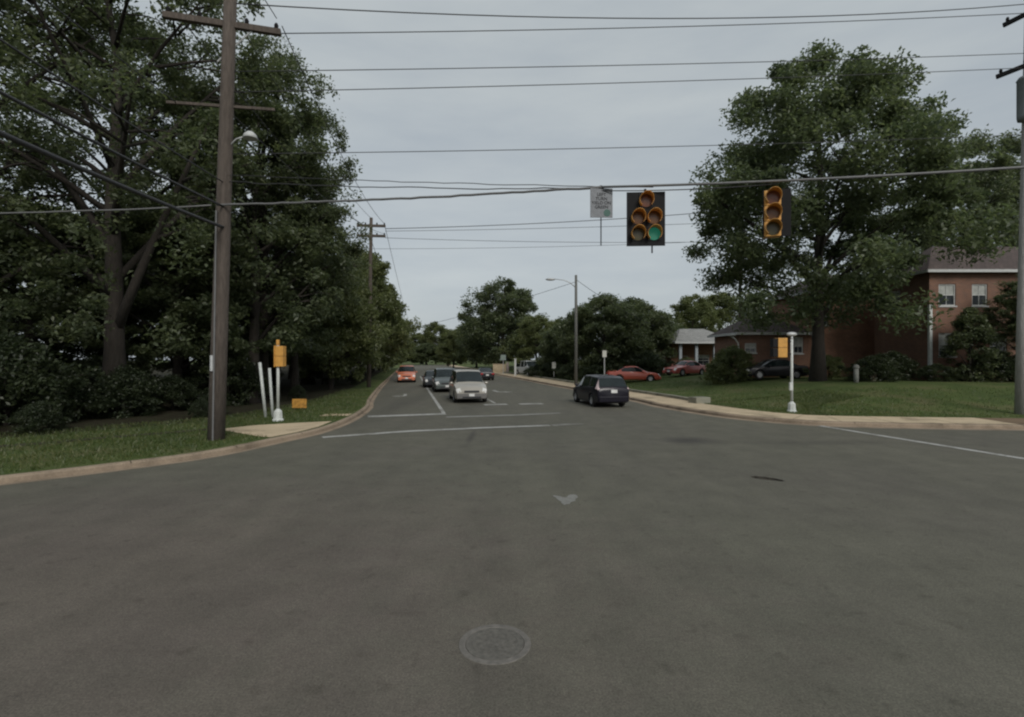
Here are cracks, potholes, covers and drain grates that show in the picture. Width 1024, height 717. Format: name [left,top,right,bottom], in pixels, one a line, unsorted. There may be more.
manhole cover [458,624,531,665]
